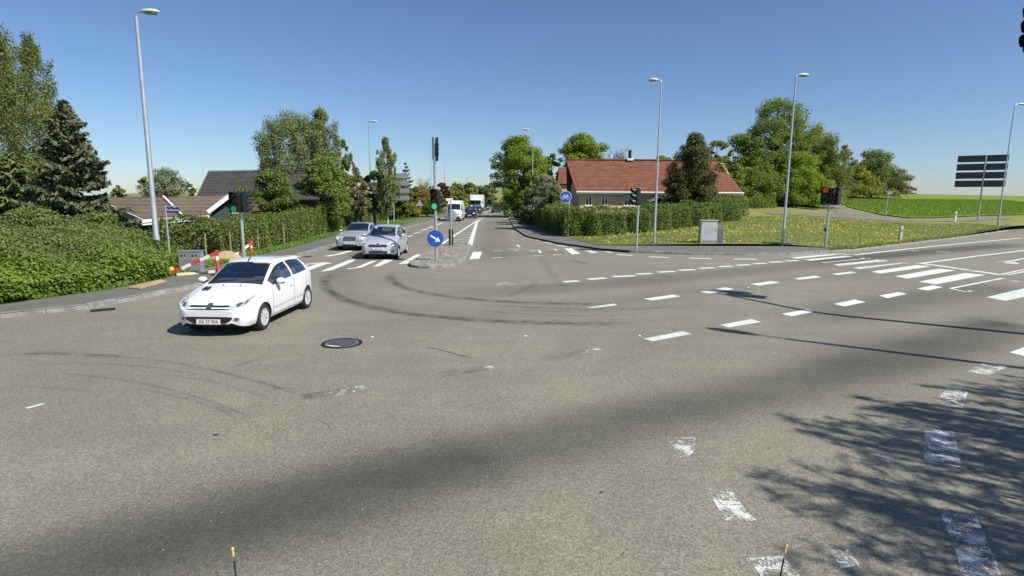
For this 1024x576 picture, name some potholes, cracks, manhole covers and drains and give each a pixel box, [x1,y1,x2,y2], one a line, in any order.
manhole cover [321,338,363,349]
